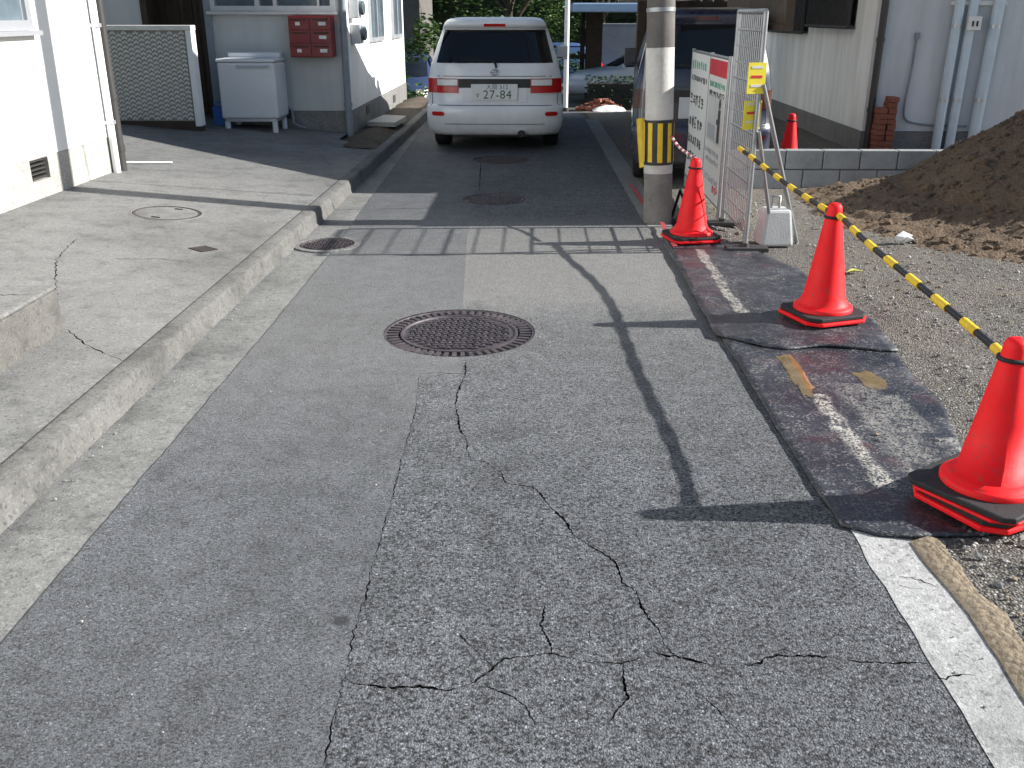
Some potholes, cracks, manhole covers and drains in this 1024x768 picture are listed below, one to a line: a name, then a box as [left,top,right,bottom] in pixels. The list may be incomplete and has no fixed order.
manhole cover [130,206,204,221]
crack [323,362,975,766]
manhole cover [462,194,526,205]
manhole cover [383,310,535,357]
manhole cover [472,156,529,164]
manhole cover [294,236,361,253]
